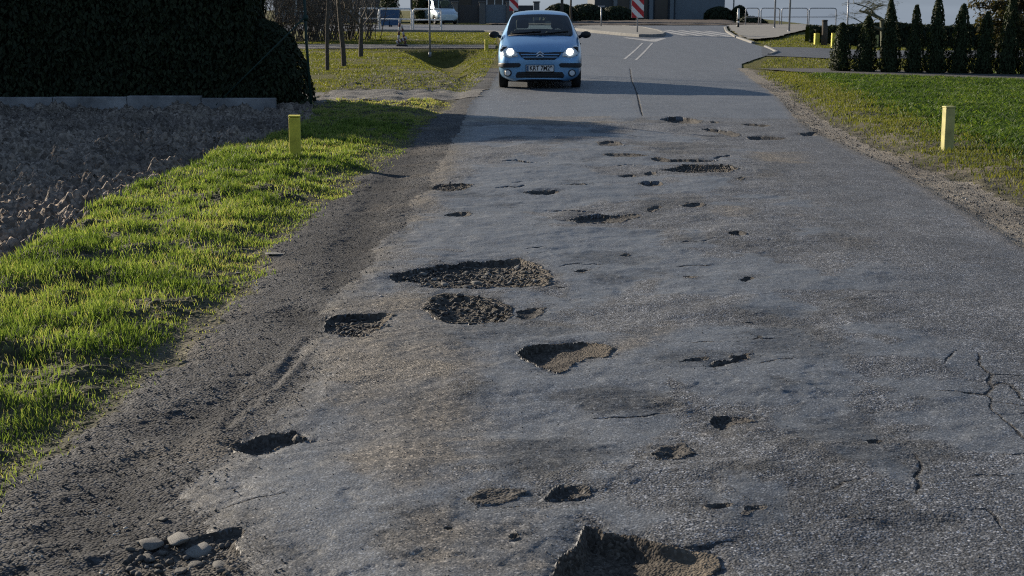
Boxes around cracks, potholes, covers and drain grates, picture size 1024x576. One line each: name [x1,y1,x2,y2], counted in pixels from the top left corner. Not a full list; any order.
pothole [651,442,695,460]
pothole [543,485,592,502]
pothole [429,182,473,192]
pothole [709,353,750,368]
pothole [467,488,527,505]
pothole [324,312,395,337]
crack [971,508,1009,534]
pothole [390,258,554,289]
pothole [518,342,614,374]
pothole [710,416,755,429]
pothole [553,526,720,576]
pothole [422,293,514,325]
